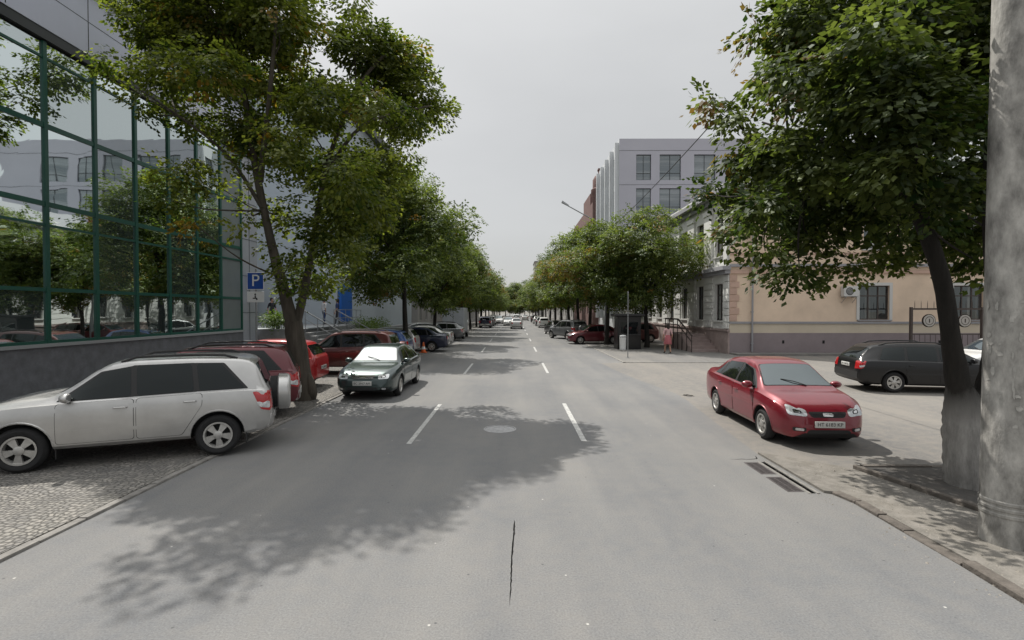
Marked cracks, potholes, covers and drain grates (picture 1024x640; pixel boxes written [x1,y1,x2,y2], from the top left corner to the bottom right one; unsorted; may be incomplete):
drain grate [744,462,776,474]
drain grate [766,477,804,492]
manhole cover [484,425,516,433]
